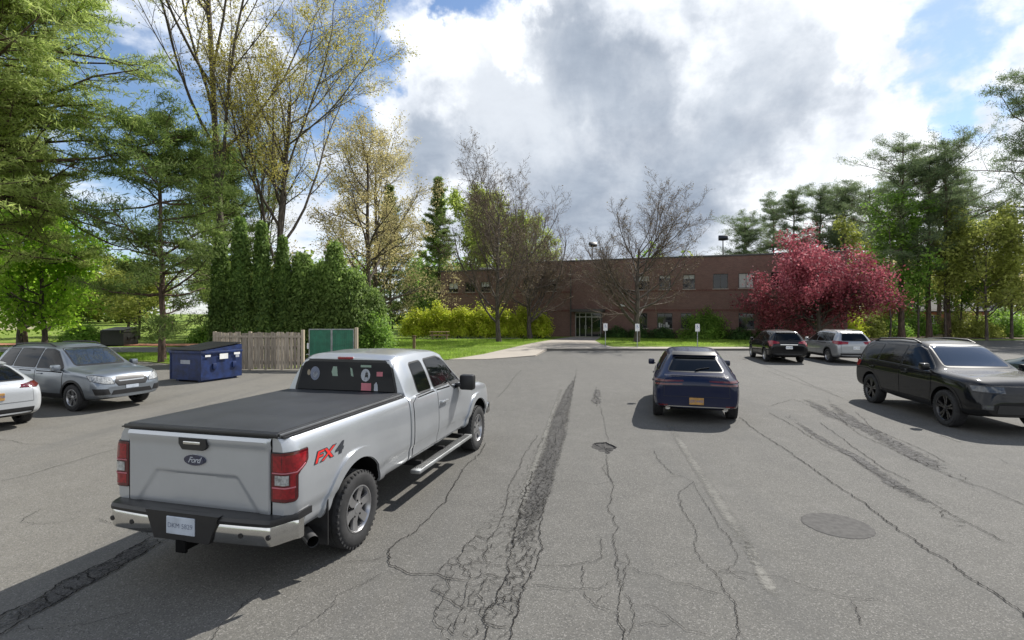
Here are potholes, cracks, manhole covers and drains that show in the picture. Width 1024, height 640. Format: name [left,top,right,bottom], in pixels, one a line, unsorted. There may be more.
crack [653,451,872,639]
crack [387,369,713,640]
pothole [592,442,617,454]
manhole cover [801,513,876,539]
crack [743,358,1024,616]
